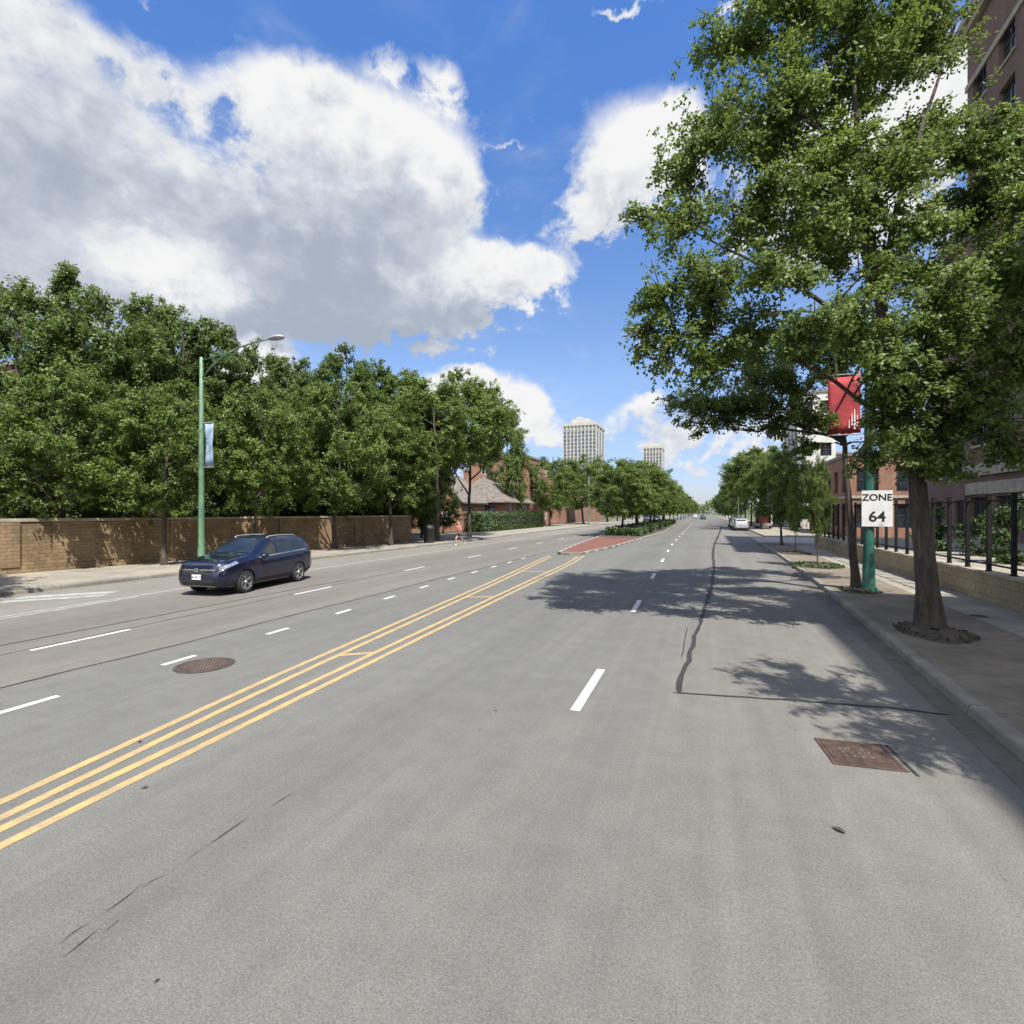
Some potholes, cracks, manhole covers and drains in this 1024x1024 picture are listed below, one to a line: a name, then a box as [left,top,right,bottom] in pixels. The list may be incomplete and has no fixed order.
crack [62,794,290,958]
manhole cover [814,738,920,777]
manhole cover [172,657,235,674]
